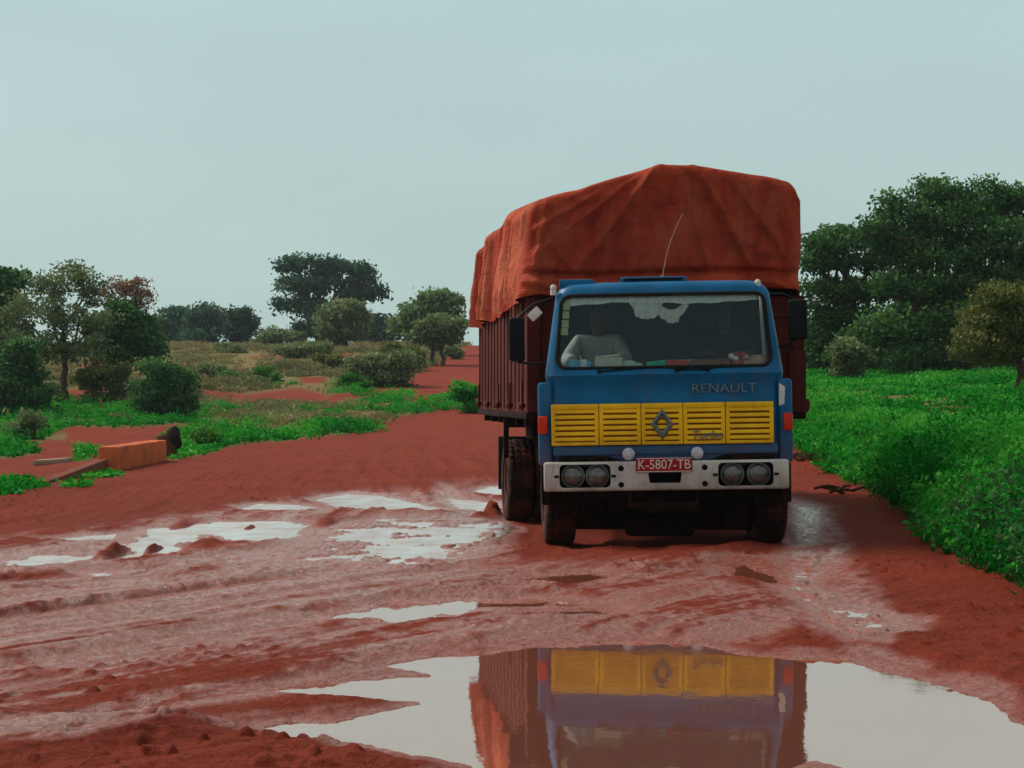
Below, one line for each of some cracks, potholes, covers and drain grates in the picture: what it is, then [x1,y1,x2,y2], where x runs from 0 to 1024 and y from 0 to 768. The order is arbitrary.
pothole [242,514,521,567]
pothole [226,629,1024,768]
pothole [103,517,318,559]
pothole [706,550,787,585]
